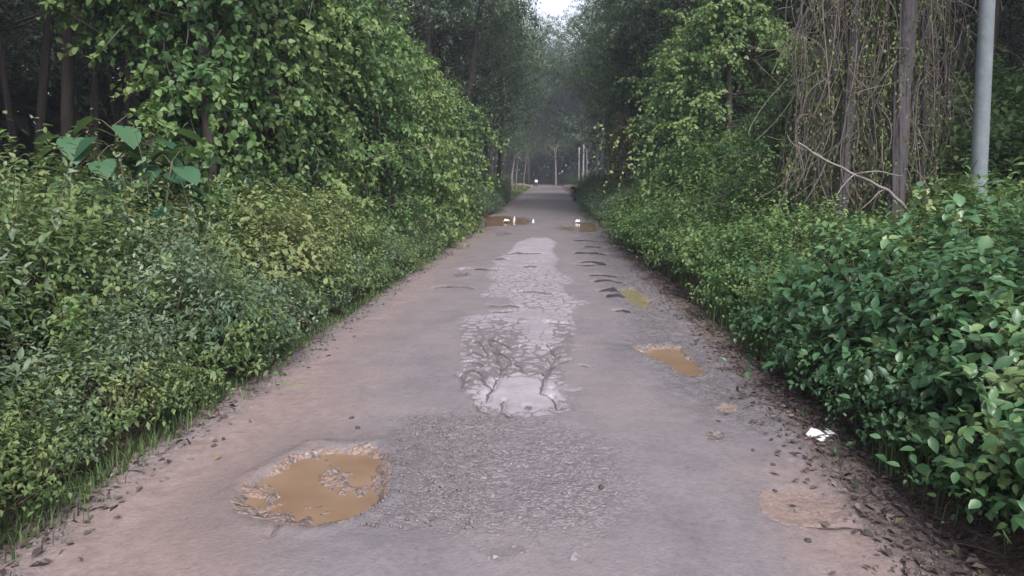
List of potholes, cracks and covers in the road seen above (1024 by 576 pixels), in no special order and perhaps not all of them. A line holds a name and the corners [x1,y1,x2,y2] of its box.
crack [435,252,550,313]
pothole [574,222,597,233]
pothole [483,216,530,226]
pothole [231,442,392,527]
pothole [634,344,705,376]
pothole [620,287,653,309]
crack [460,339,587,418]
